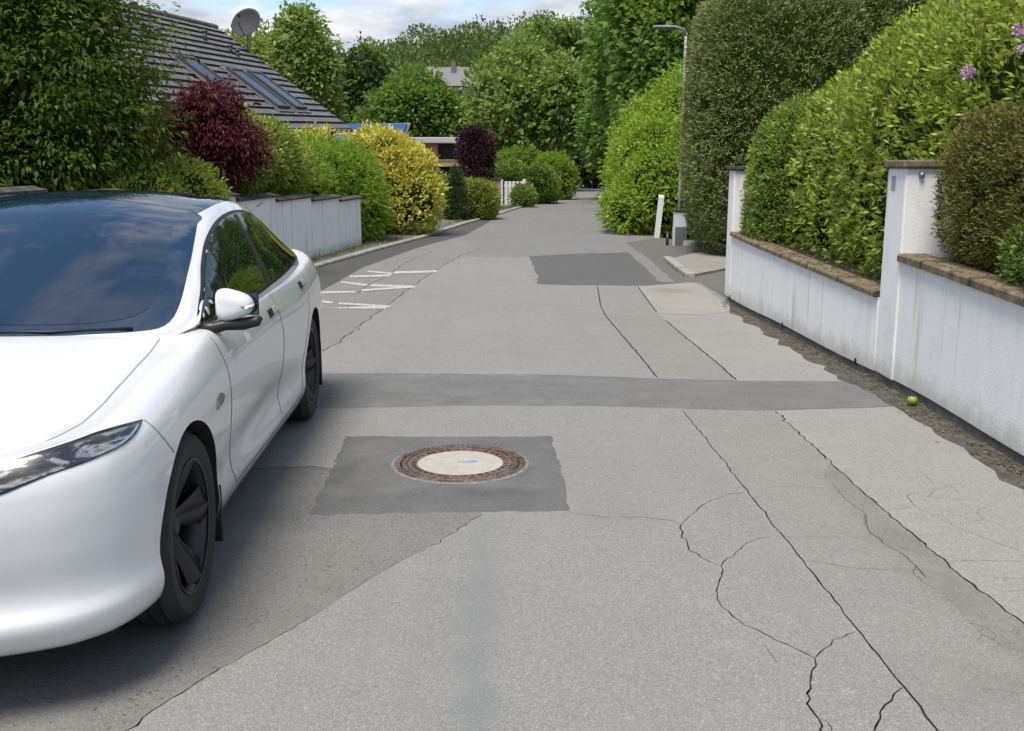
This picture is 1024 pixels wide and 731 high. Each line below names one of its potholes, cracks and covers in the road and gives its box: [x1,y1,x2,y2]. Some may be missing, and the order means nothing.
crack [571,492,854,731]
crack [838,489,936,590]
manhole cover [391,444,529,484]
